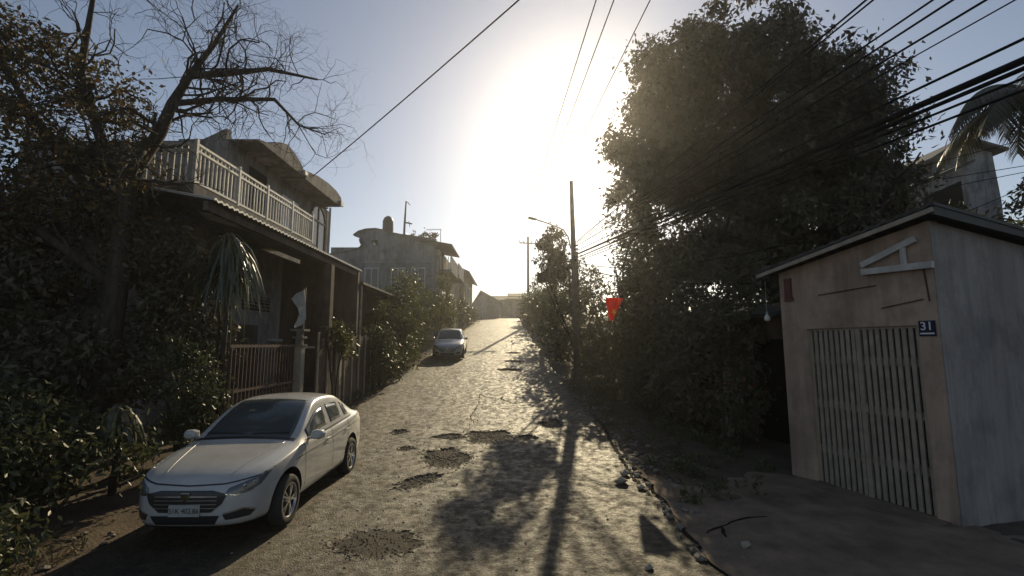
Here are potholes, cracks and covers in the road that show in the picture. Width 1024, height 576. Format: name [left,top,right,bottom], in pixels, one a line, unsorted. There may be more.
pothole [321,526,430,560]
crack [706,516,768,537]
pothole [387,472,449,491]
pothole [459,429,520,445]
pothole [538,418,563,429]
pothole [418,445,478,469]
crack [470,394,542,424]
